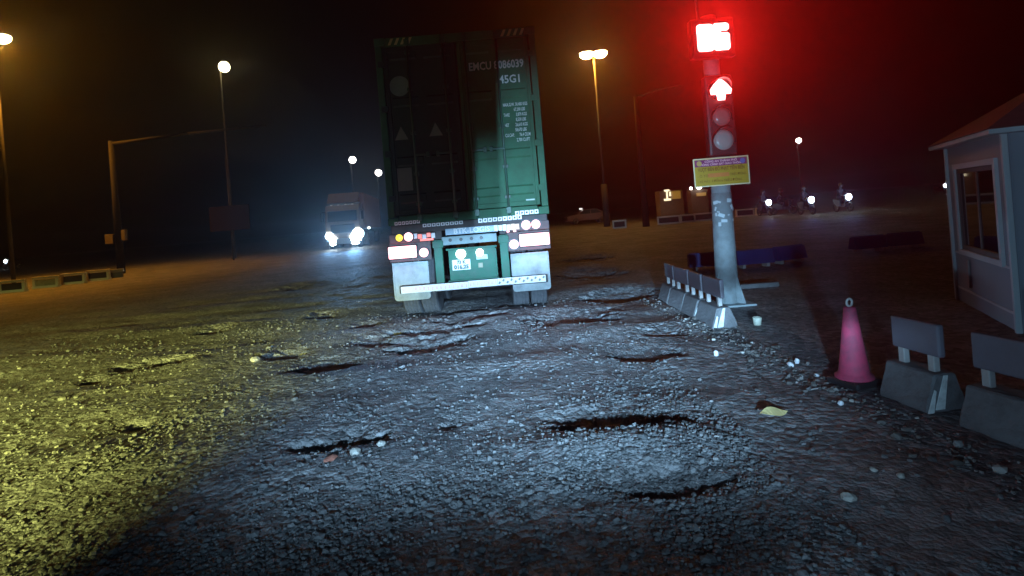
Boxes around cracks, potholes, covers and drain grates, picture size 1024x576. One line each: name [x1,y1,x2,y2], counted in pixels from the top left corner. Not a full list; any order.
pothole [146,352,217,369]
pothole [375,328,483,356]
pothole [279,354,369,376]
pothole [585,343,692,364]
pothole [108,356,185,376]
pothole [518,397,708,433]
pothole [587,453,750,504]
pothole [192,322,245,335]
pothole [513,306,642,328]
pothole [571,284,661,305]
pothole [277,420,404,455]
